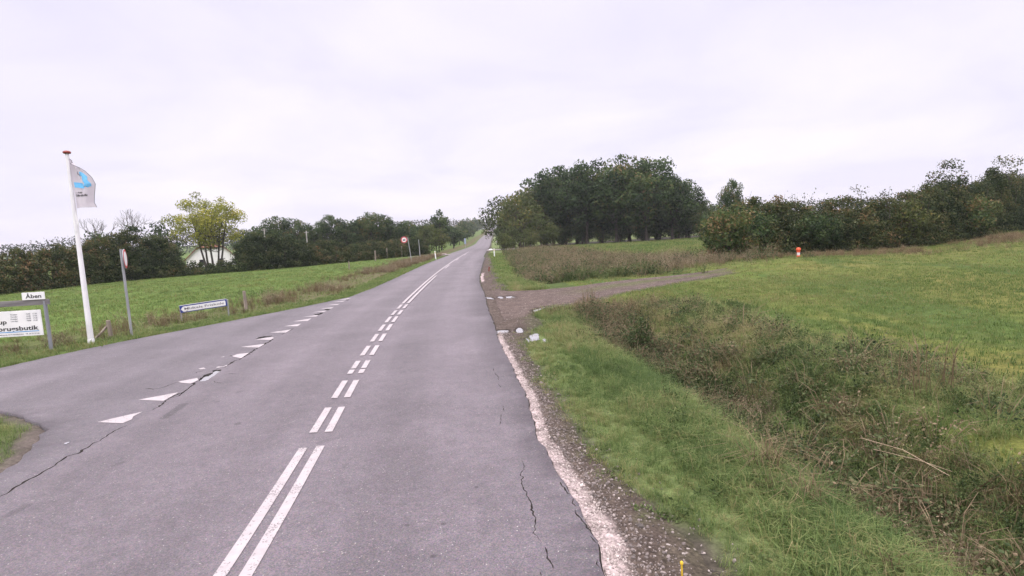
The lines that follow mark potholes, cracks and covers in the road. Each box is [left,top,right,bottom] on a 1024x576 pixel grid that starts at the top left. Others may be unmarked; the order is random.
crack [1,426,125,496]
crack [479,258,606,576]
